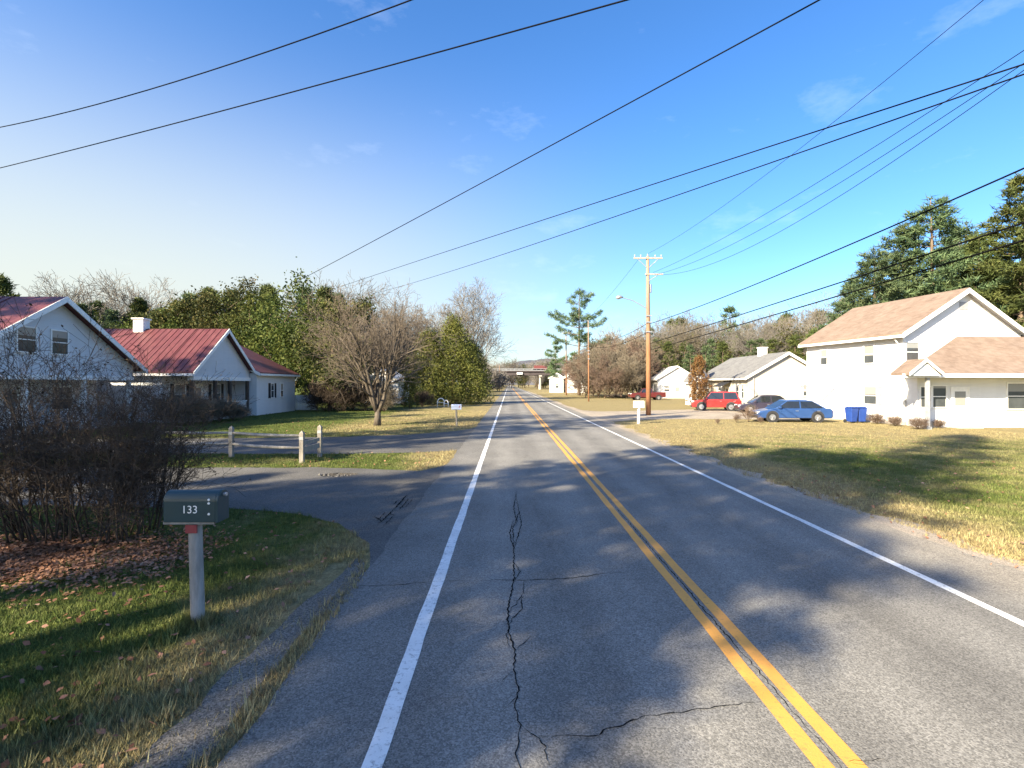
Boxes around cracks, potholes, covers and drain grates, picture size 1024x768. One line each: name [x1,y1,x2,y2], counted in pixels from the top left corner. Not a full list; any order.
crack [361,490,761,768]
